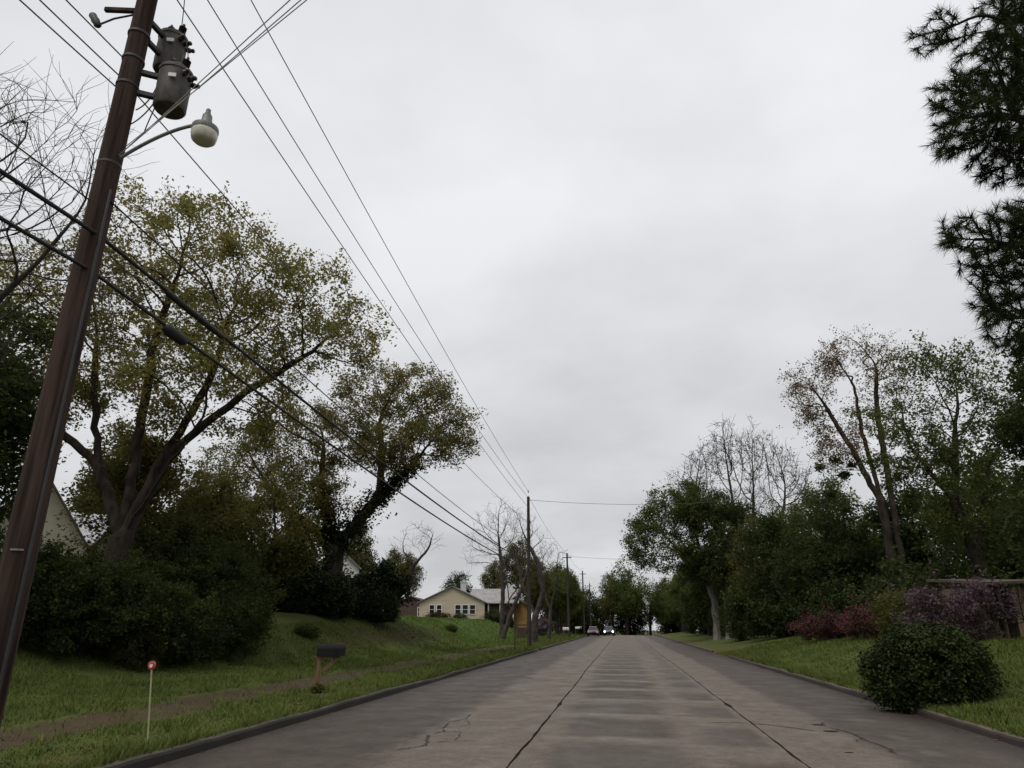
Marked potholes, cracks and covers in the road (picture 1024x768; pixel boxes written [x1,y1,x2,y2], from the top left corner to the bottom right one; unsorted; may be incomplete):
crack [379,714,483,752]
crack [720,714,896,754]
